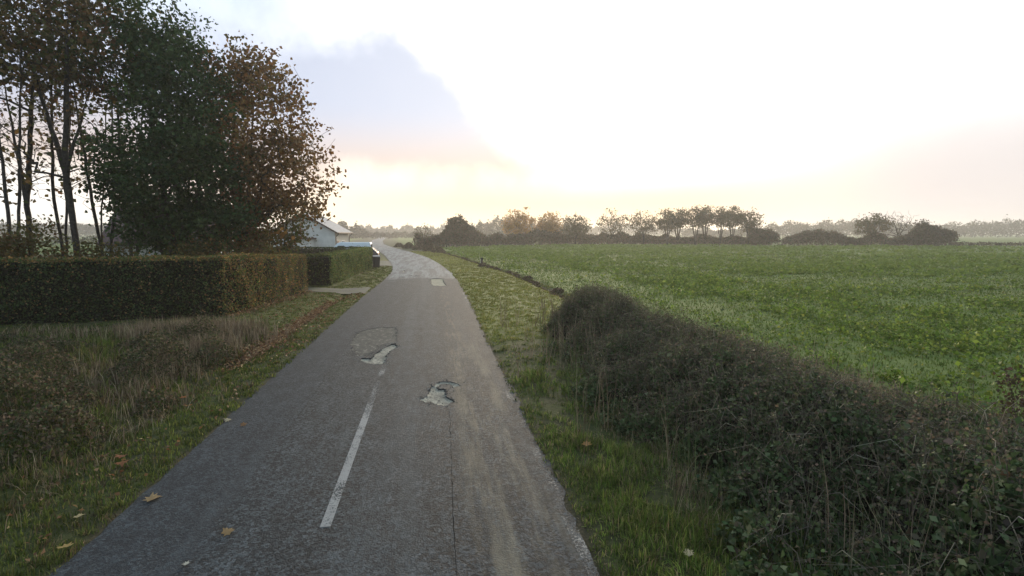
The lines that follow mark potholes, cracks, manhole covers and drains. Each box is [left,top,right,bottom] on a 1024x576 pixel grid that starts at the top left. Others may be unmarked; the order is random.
pothole [355,342,400,364]
crack [449,414,457,575]
pothole [417,380,465,407]
